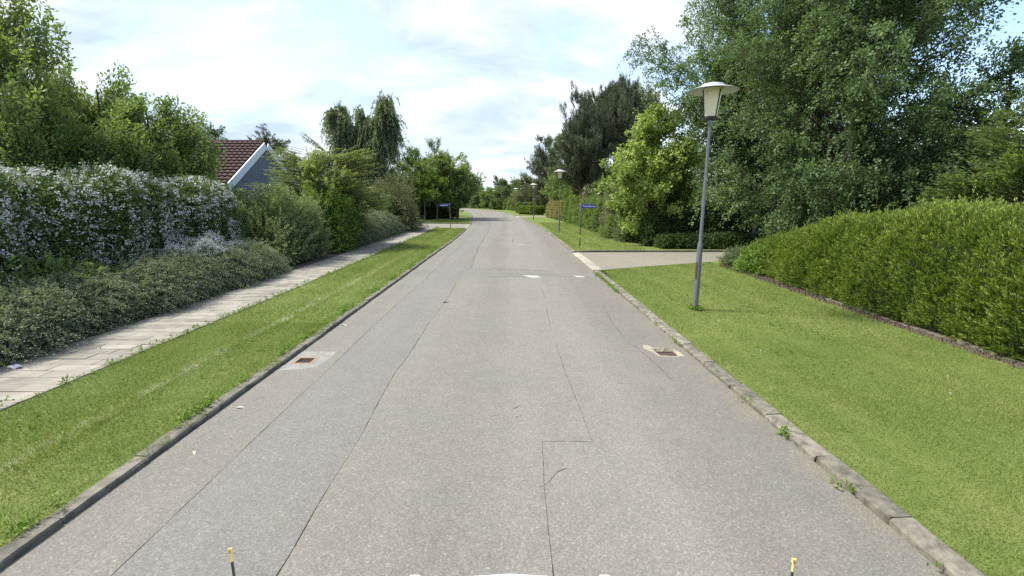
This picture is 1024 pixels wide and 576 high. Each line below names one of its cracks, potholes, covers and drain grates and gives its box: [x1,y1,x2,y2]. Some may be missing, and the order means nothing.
drain grate [276,351,335,371]
crack [502,274,593,576]
drain grate [643,345,684,357]
